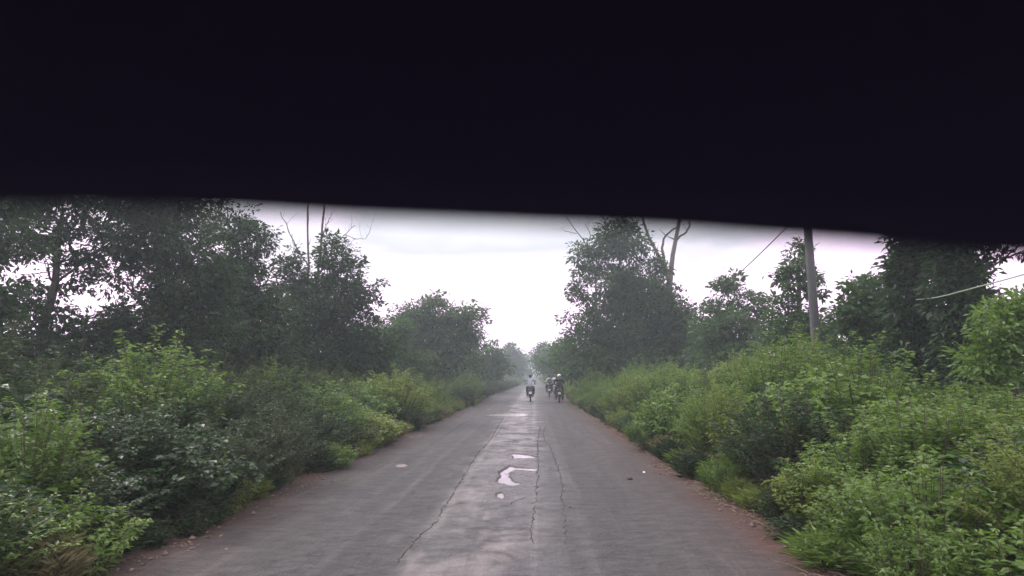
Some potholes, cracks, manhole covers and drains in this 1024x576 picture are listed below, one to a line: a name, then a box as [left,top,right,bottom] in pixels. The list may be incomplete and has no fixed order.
crack [392,417,507,568]
crack [511,426,573,546]
pothole [495,465,537,486]
